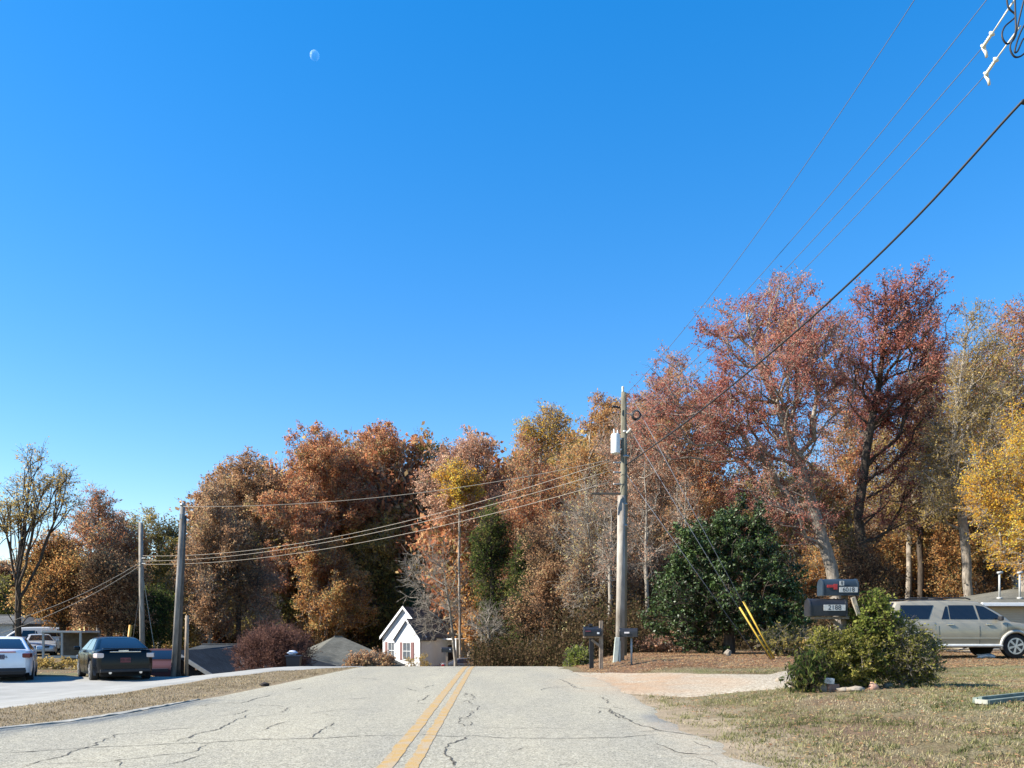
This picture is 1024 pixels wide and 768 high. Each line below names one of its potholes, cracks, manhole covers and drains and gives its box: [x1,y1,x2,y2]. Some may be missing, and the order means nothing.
crack [0,687,719,766]
